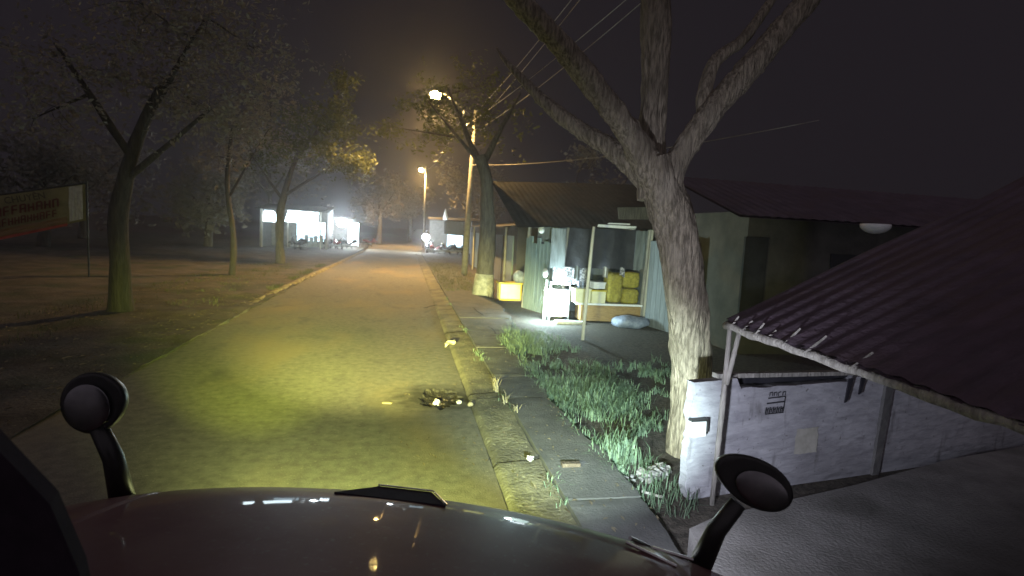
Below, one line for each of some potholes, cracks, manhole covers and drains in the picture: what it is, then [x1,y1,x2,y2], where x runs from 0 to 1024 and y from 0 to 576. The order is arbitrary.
pothole [418,388,464,410]
